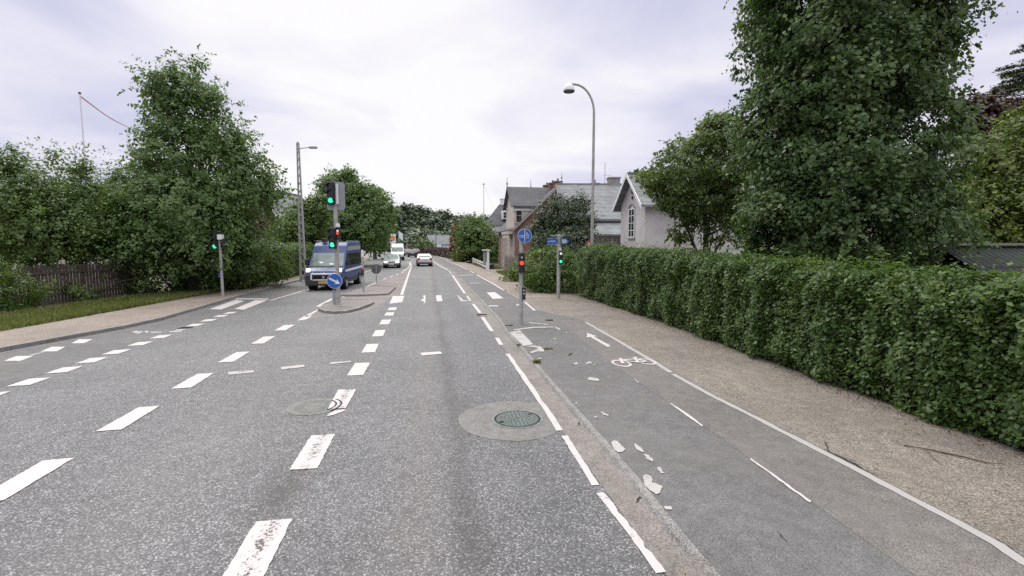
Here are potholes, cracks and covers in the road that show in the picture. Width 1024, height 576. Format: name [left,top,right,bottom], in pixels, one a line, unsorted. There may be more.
manhole cover [286,398,342,415]
manhole cover [492,410,543,429]
crack [825,442,878,475]
